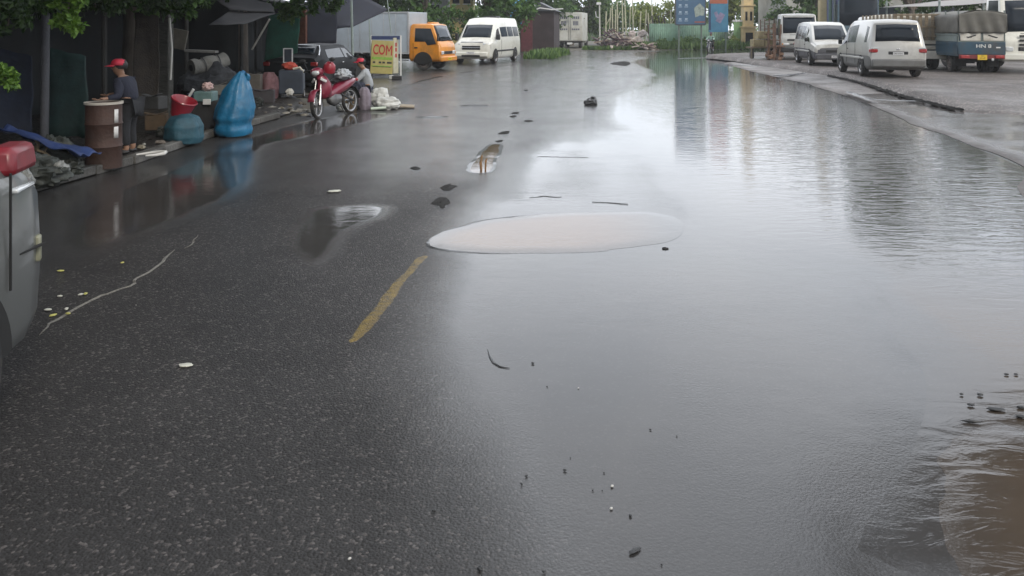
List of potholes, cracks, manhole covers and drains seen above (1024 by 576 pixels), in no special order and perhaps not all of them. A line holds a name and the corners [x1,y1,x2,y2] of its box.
crack [39,235,198,335]
pothole [431,197,450,208]
